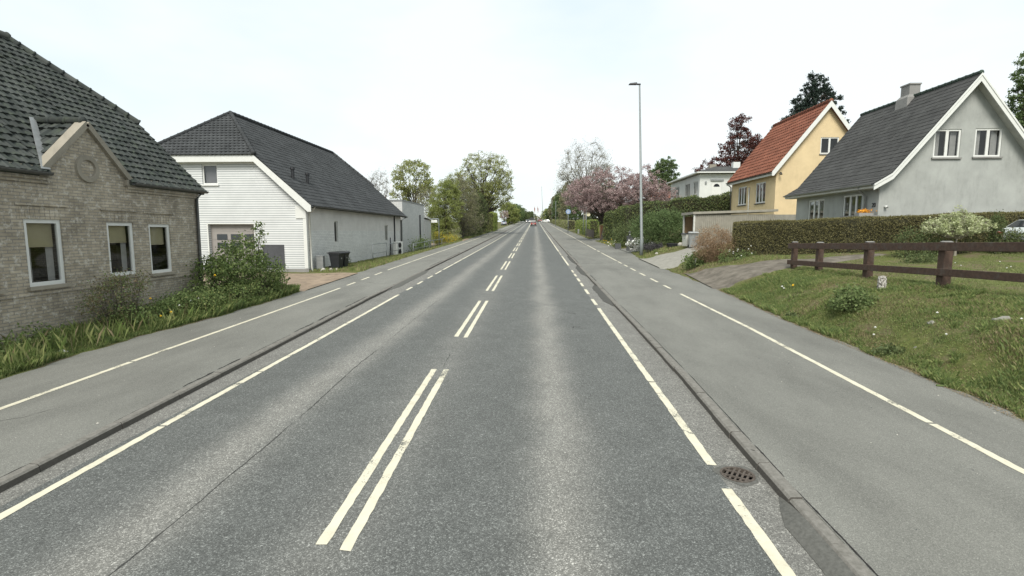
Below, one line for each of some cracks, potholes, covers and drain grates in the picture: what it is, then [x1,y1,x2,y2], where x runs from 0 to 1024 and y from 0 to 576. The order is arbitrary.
drain grate [712,465,759,486]
